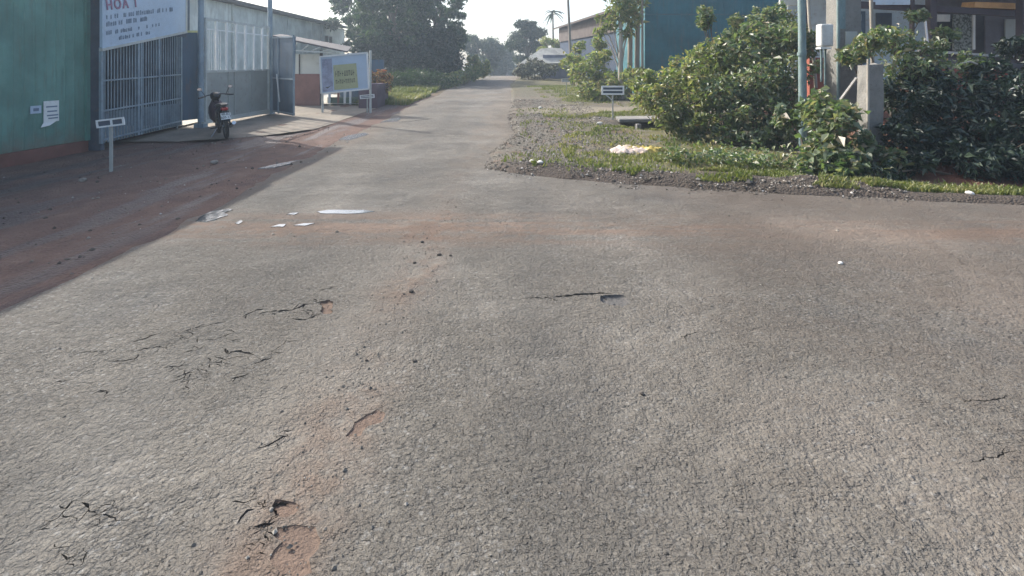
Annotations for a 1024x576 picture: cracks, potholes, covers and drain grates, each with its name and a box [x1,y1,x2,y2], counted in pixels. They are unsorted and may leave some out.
crack [57,322,291,395]
crack [258,430,291,449]
crack [37,493,145,566]
crack [526,292,612,301]
crack [233,493,289,554]
crack [960,396,1017,462]
crack [244,287,332,320]
